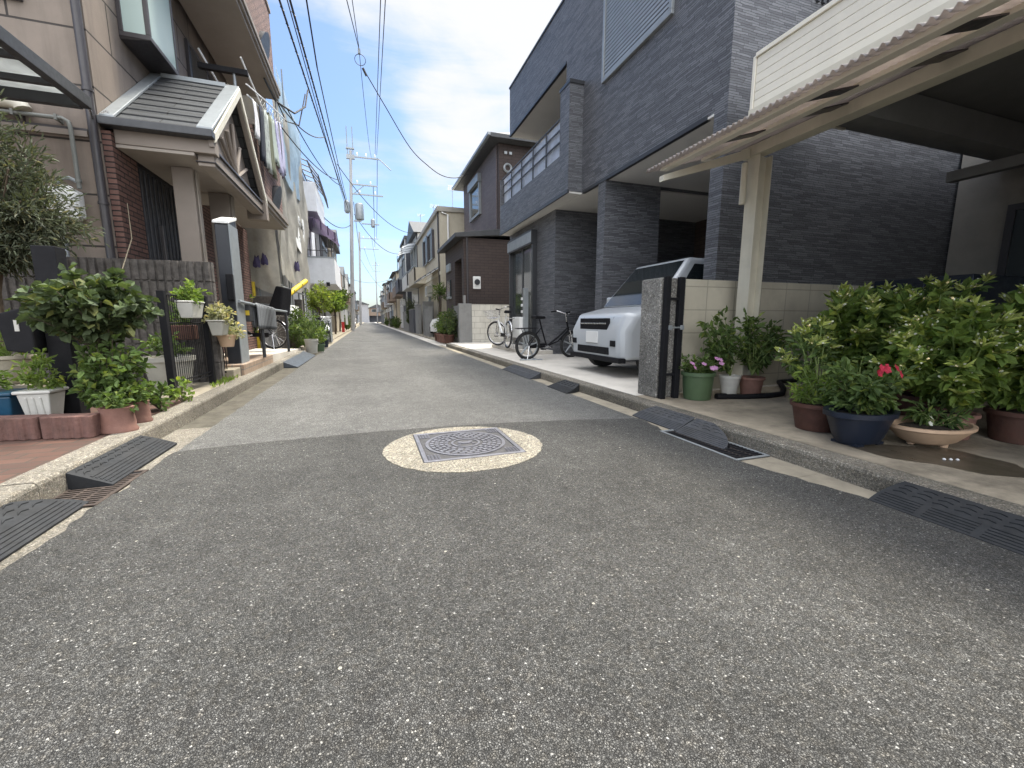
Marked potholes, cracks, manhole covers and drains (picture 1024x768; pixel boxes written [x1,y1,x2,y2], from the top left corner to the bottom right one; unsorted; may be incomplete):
manhole cover [382,426,543,473]
drain grate [661,429,770,461]
drain grate [52,469,149,508]
